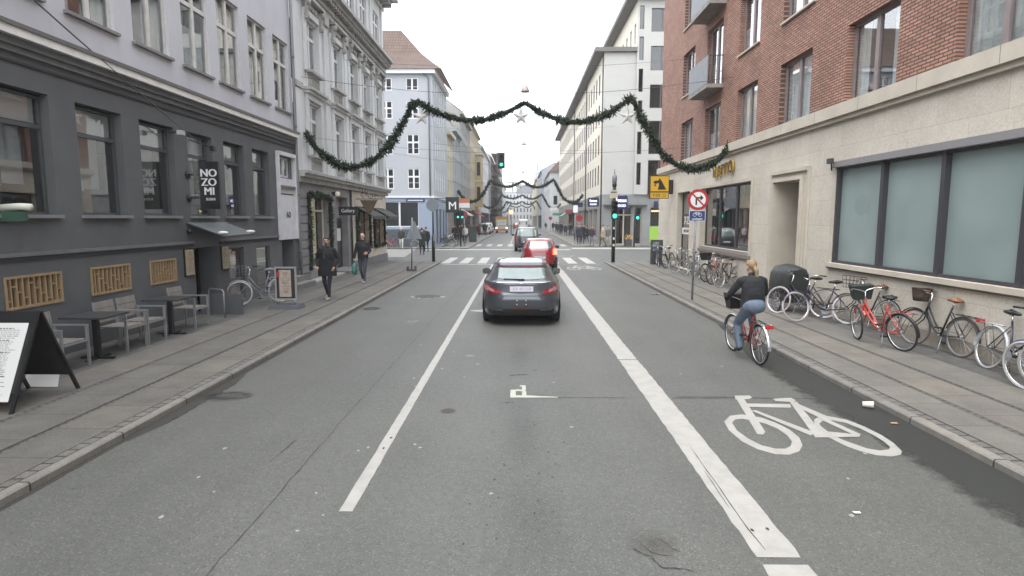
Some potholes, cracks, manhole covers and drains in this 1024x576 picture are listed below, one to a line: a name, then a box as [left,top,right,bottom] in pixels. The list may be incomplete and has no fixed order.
crack [633,538,691,571]
crack [693,451,765,549]
